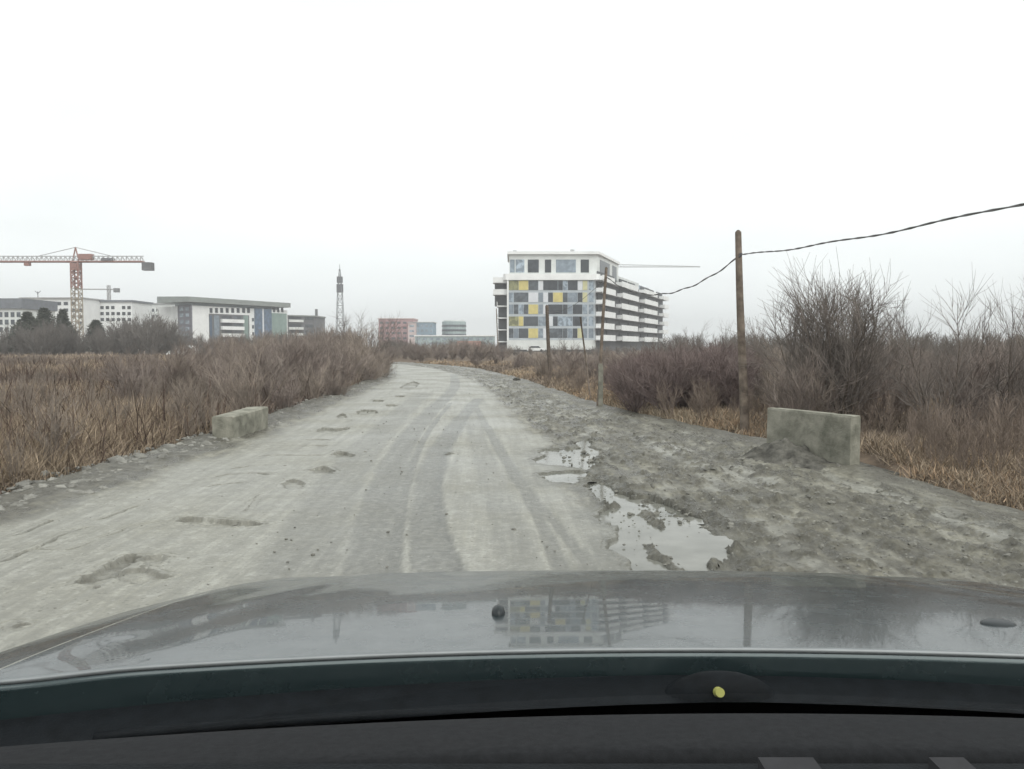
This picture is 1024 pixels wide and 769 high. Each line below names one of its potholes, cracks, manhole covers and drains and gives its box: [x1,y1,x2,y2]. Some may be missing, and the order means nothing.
pothole [529,438,607,472]
pothole [532,469,600,485]
pothole [66,553,181,589]
pothole [574,477,746,571]
pothole [168,516,276,529]
